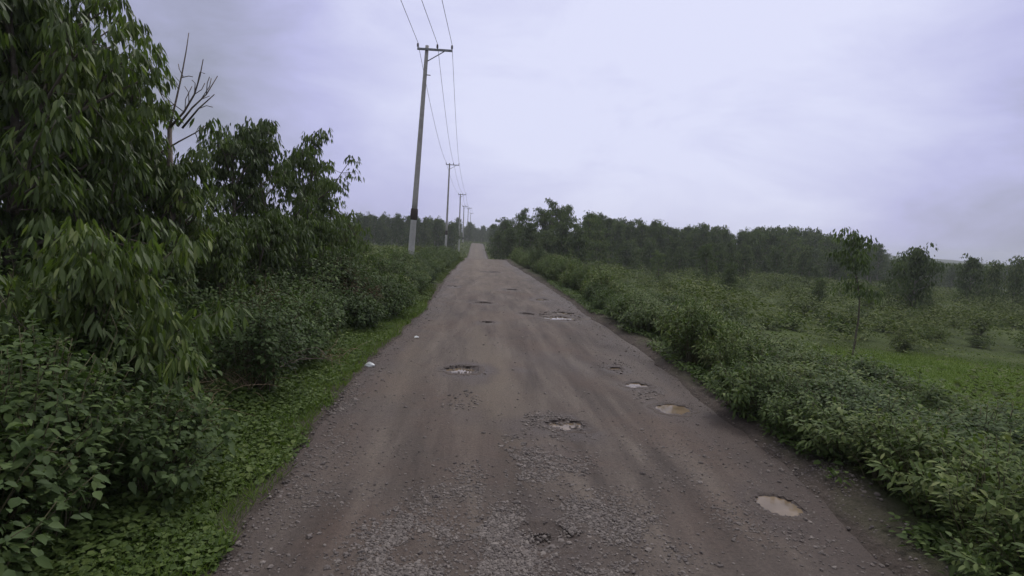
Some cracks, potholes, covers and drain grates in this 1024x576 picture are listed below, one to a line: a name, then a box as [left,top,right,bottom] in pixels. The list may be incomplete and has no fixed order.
pothole [646,401,701,417]
pothole [534,416,599,434]
pothole [433,364,486,375]
pothole [744,489,816,522]
pothole [619,380,657,389]
